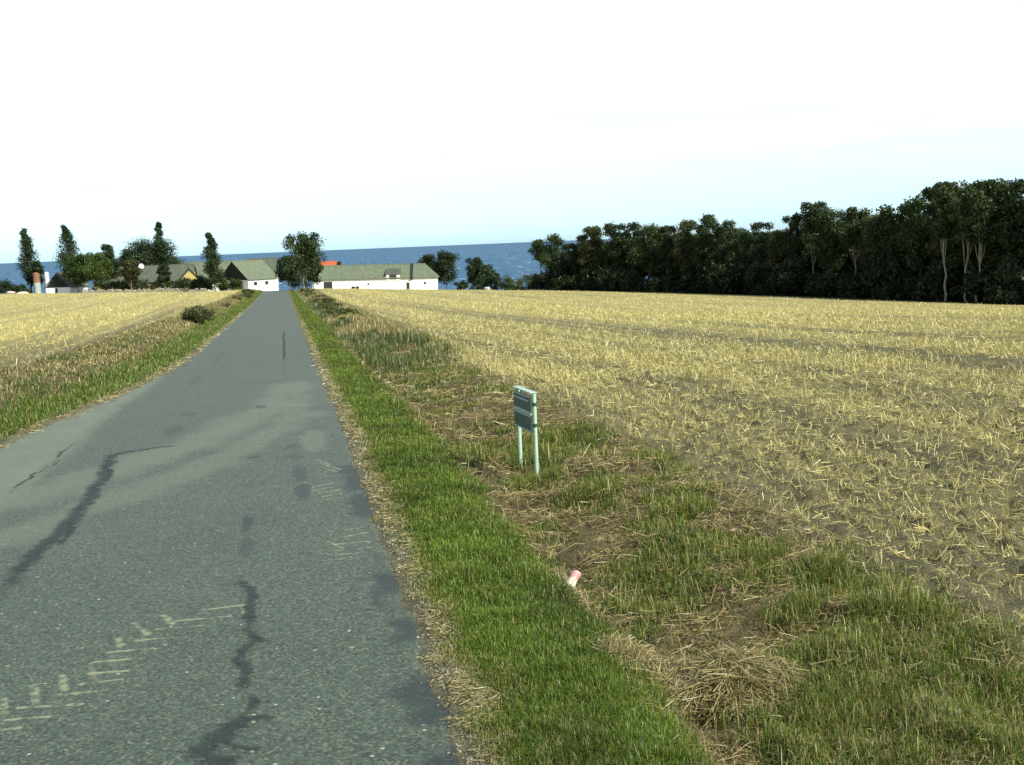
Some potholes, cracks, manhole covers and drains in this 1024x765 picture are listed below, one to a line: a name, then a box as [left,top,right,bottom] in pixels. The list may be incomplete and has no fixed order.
crack [12,445,169,579]
